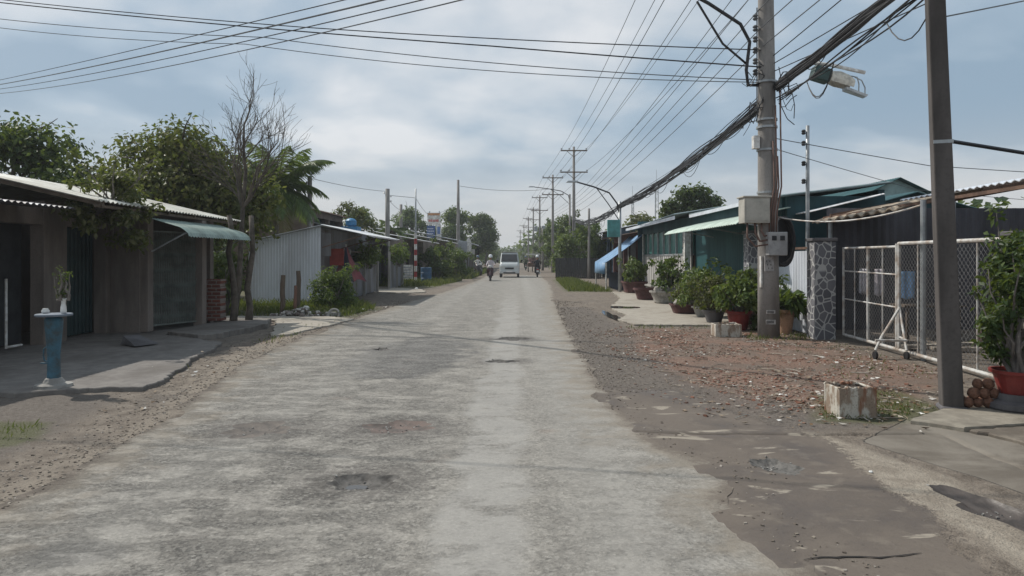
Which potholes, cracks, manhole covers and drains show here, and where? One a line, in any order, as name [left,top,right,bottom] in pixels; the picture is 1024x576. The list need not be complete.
pothole [749,456,805,475]
pothole [326,473,400,490]
